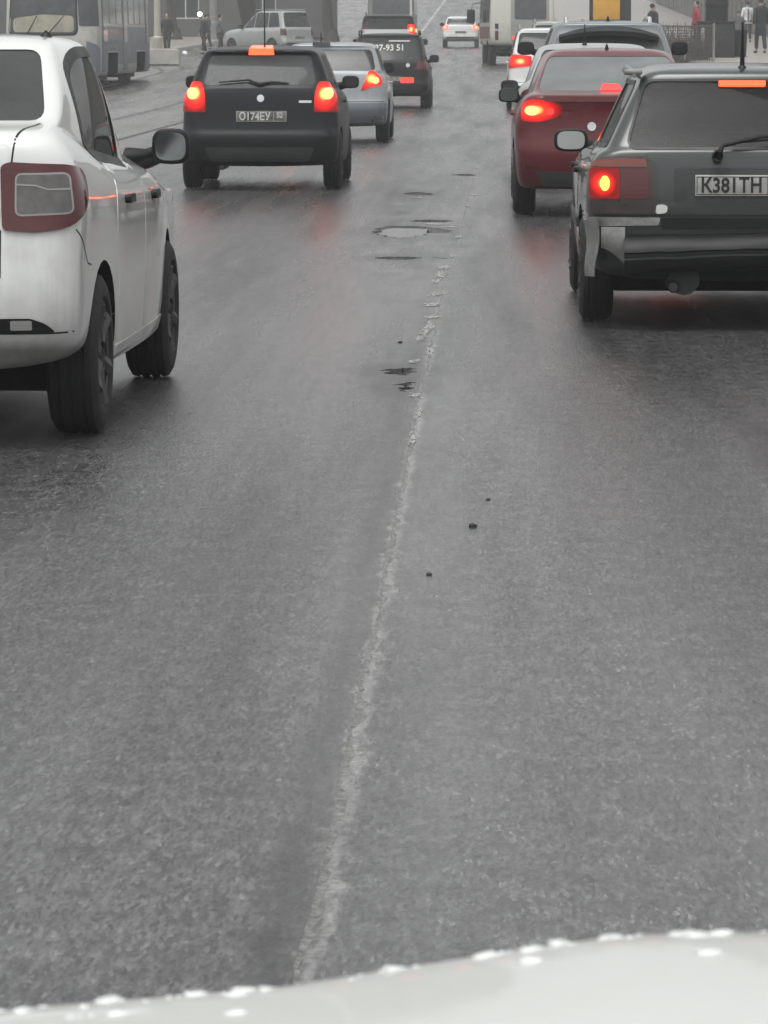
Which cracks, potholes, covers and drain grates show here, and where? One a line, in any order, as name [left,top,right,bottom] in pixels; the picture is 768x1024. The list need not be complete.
crack [293,123,491,985]
pothole [372,226,454,238]
